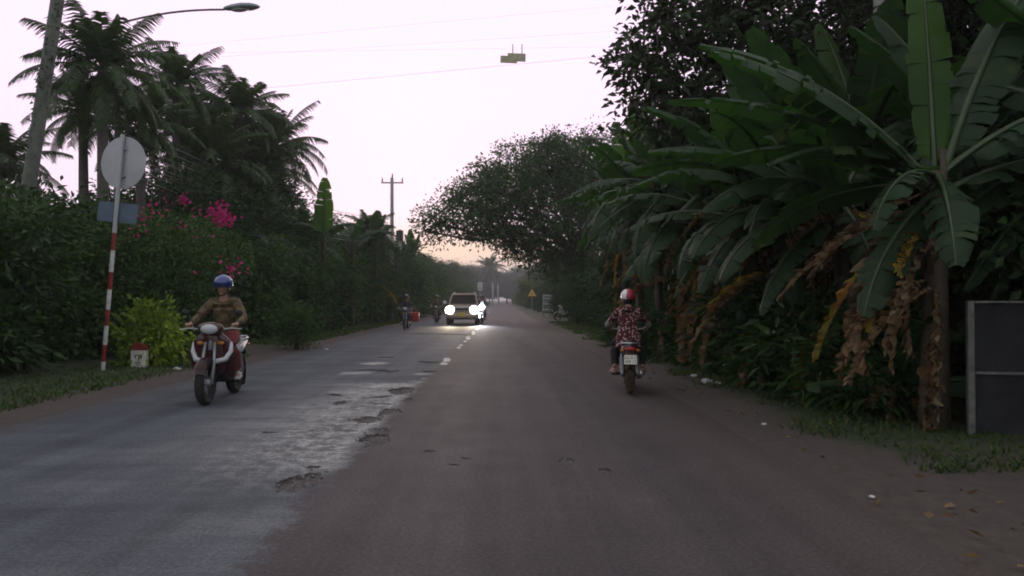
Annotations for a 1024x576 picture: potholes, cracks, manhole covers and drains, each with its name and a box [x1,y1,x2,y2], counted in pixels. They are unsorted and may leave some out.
pothole [272,468,328,493]
pothole [387,386,419,395]
pothole [379,407,402,415]
pothole [348,415,384,424]
pothole [355,431,392,448]
